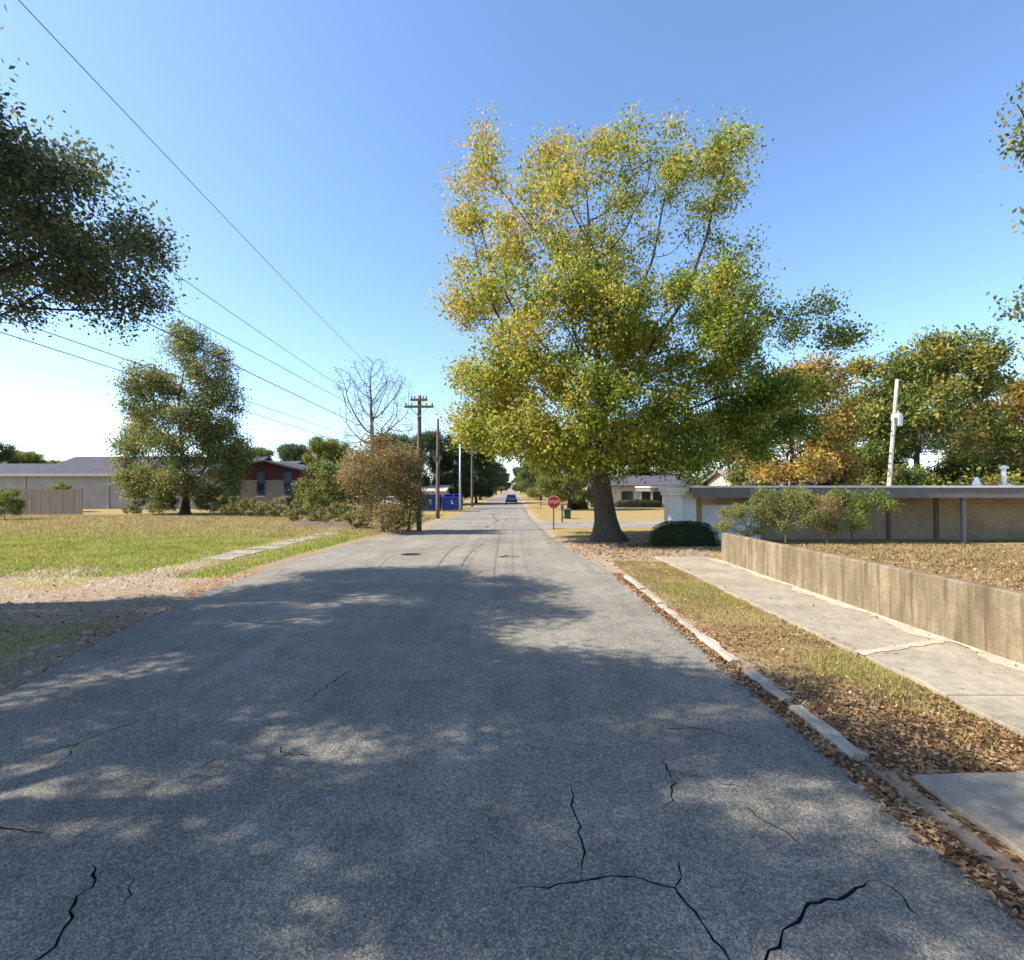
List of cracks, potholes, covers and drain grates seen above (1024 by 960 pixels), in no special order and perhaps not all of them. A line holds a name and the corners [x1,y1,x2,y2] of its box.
crack [35,864,97,960]
crack [509,783,730,960]
crack [764,880,918,960]
crack [661,760,742,808]
crack [38,719,142,771]
crack [745,805,802,845]
